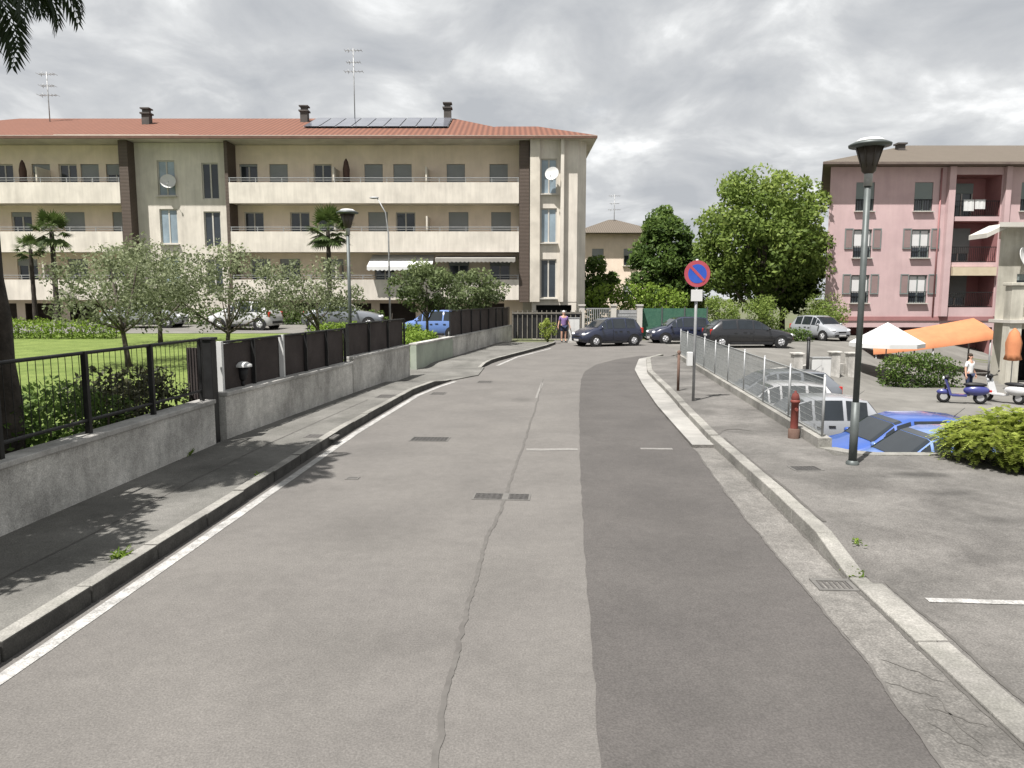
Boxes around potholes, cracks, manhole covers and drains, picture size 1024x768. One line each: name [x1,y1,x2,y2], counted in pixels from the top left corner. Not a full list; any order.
drain grate [809,578,860,591]
